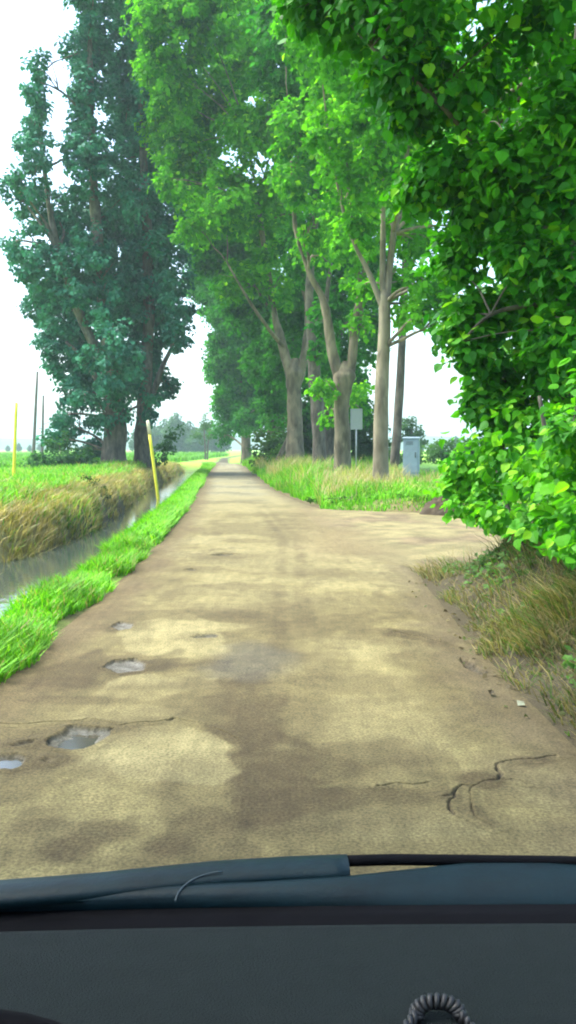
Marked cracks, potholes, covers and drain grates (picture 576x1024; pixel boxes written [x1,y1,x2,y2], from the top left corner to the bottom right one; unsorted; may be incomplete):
crack [0,715,251,745]
crack [364,751,570,833]
pothole [0,750,39,774]
pothole [182,632,225,641]
pothole [35,721,125,754]
pothole [95,656,155,676]
pothole [106,620,142,633]
